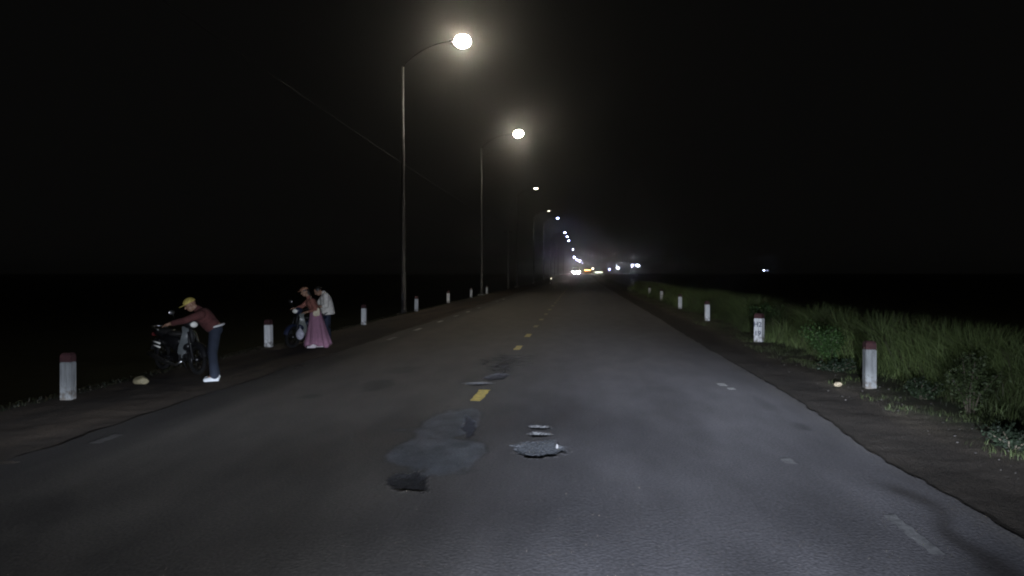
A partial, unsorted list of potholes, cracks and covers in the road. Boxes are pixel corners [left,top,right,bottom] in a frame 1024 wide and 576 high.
pothole [381,470,433,494]
pothole [481,372,512,381]
pothole [506,439,574,463]
